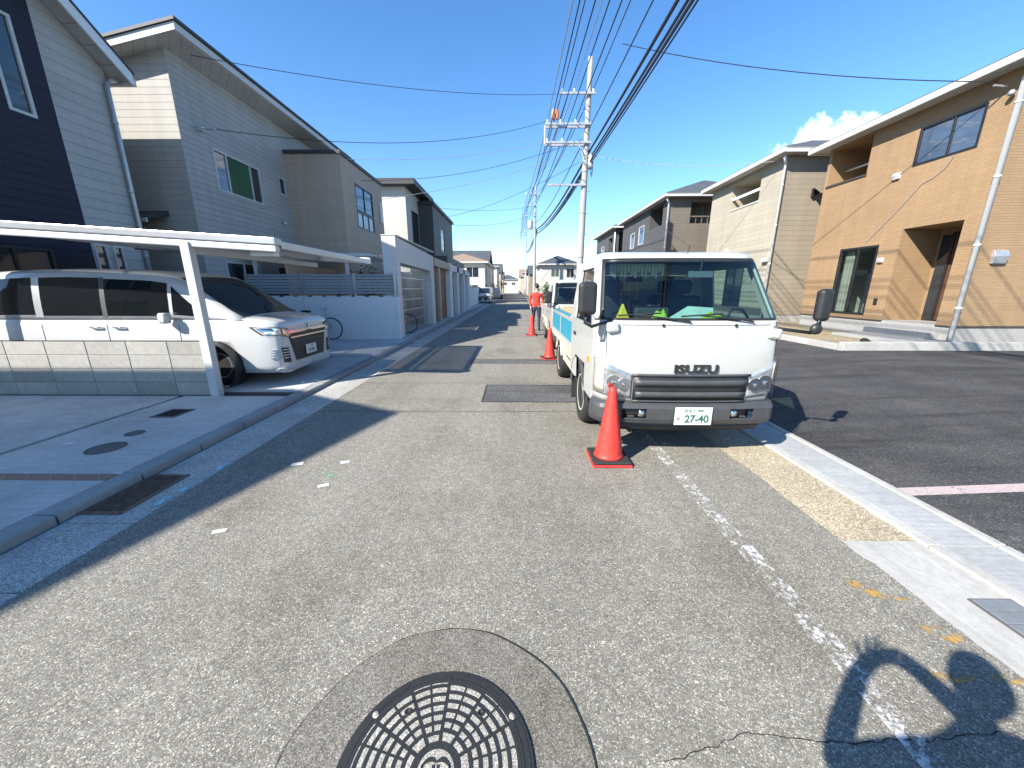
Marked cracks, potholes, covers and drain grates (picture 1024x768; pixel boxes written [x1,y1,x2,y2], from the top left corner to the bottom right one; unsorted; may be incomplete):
crack [655,730,1016,763]
drain grate [149,409,196,418]
utility cover [83,441,128,455]
drain grate [78,474,190,515]
manhole cover [275,628,597,768]
